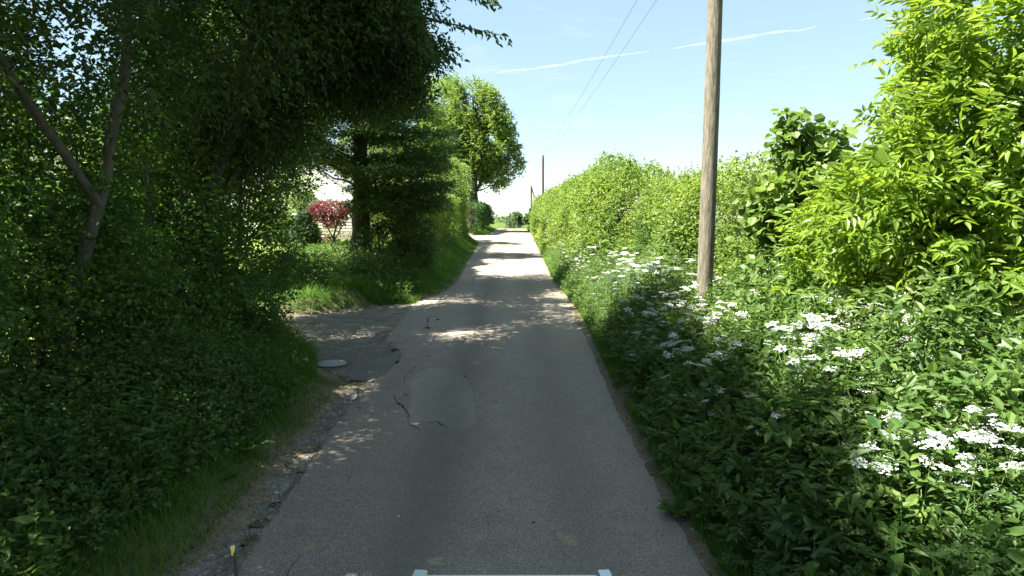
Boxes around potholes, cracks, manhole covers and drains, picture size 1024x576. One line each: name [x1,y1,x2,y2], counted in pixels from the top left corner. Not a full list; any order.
manhole cover [316,359,348,368]
crack [384,336,445,430]
